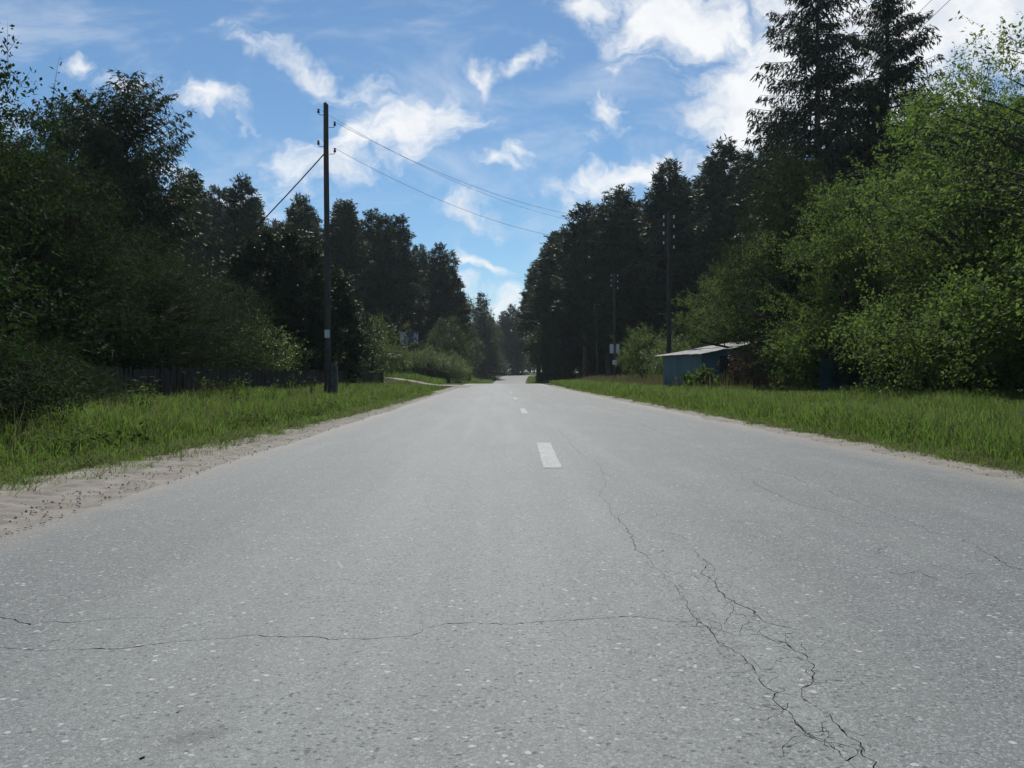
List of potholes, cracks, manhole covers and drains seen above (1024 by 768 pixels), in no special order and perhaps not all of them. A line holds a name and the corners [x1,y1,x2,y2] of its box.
crack [562,433,877,768]
crack [646,426,1019,575]
crack [0,616,687,651]
